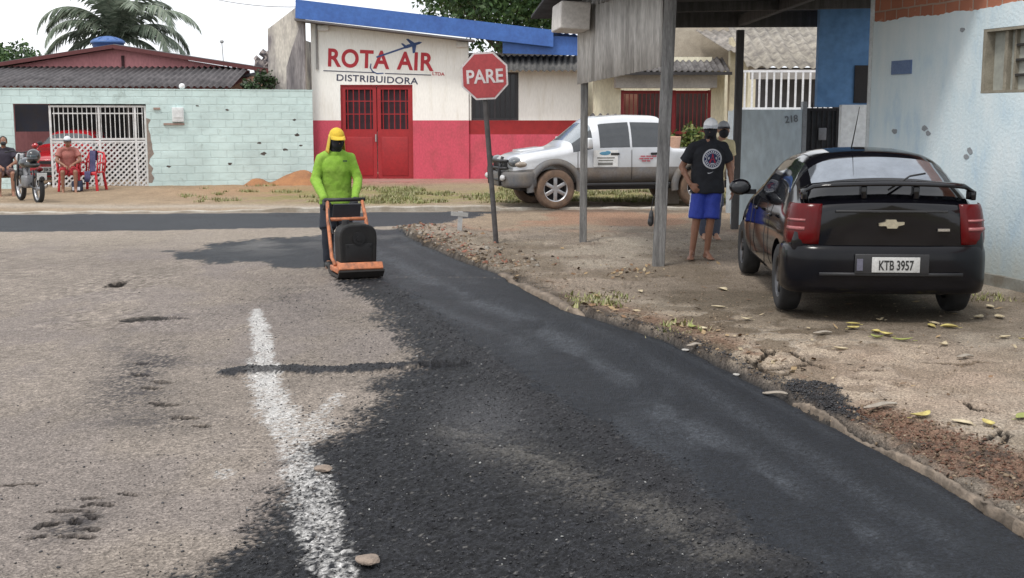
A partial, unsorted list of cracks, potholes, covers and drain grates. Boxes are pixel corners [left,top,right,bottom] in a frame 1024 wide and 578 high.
crack [955,400,1015,449]
crack [742,348,891,376]
